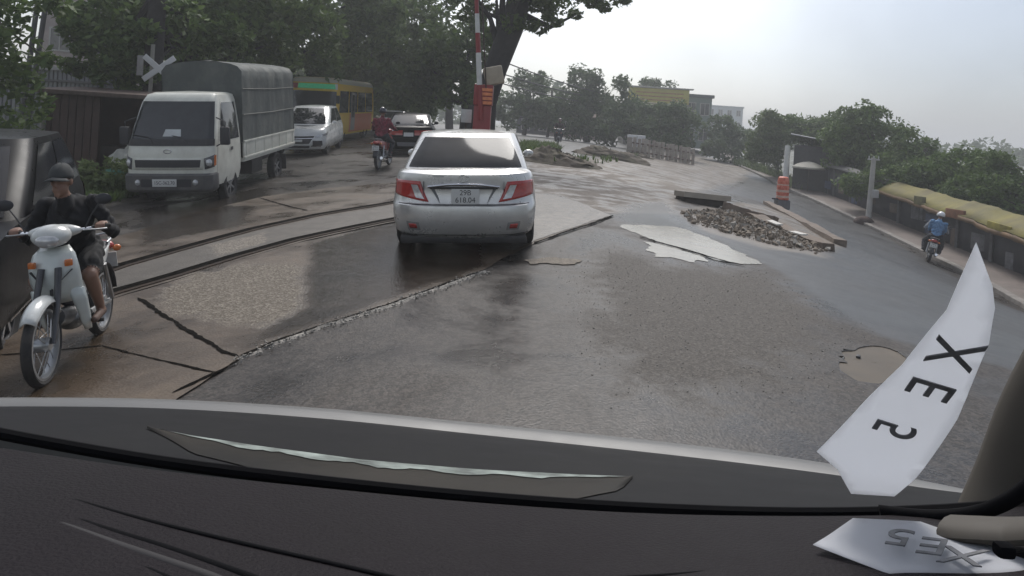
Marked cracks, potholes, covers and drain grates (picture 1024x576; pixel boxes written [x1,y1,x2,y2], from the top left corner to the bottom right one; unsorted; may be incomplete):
pothole [838,345,906,384]
